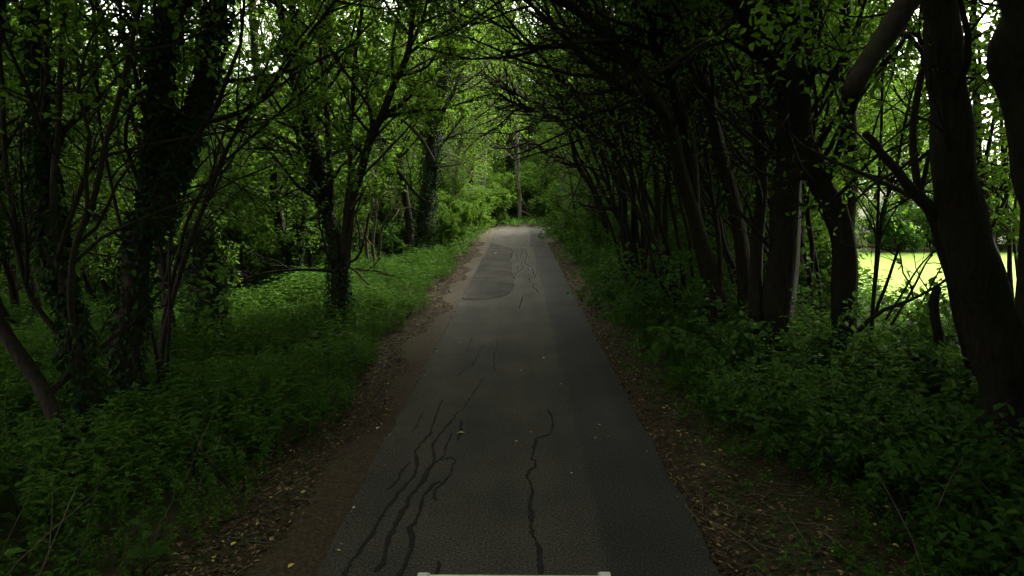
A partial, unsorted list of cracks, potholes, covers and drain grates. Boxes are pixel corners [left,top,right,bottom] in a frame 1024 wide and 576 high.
crack [513,249,540,309]
crack [453,337,498,419]
